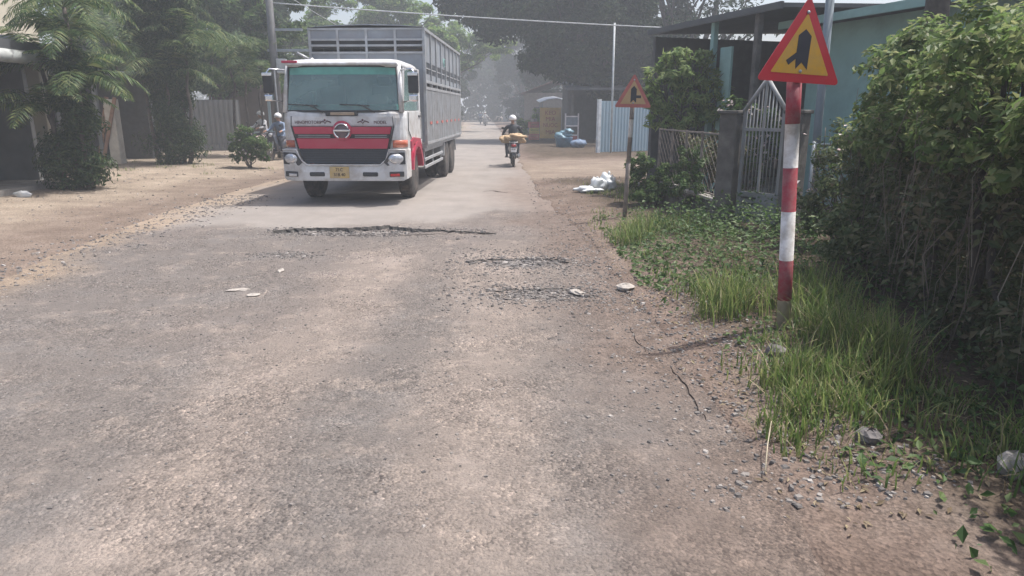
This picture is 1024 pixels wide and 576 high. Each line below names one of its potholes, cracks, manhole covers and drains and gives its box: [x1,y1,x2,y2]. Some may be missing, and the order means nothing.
pothole [463,258,575,268]
pothole [495,287,596,304]
crack [671,368,706,420]
pothole [271,225,497,237]
